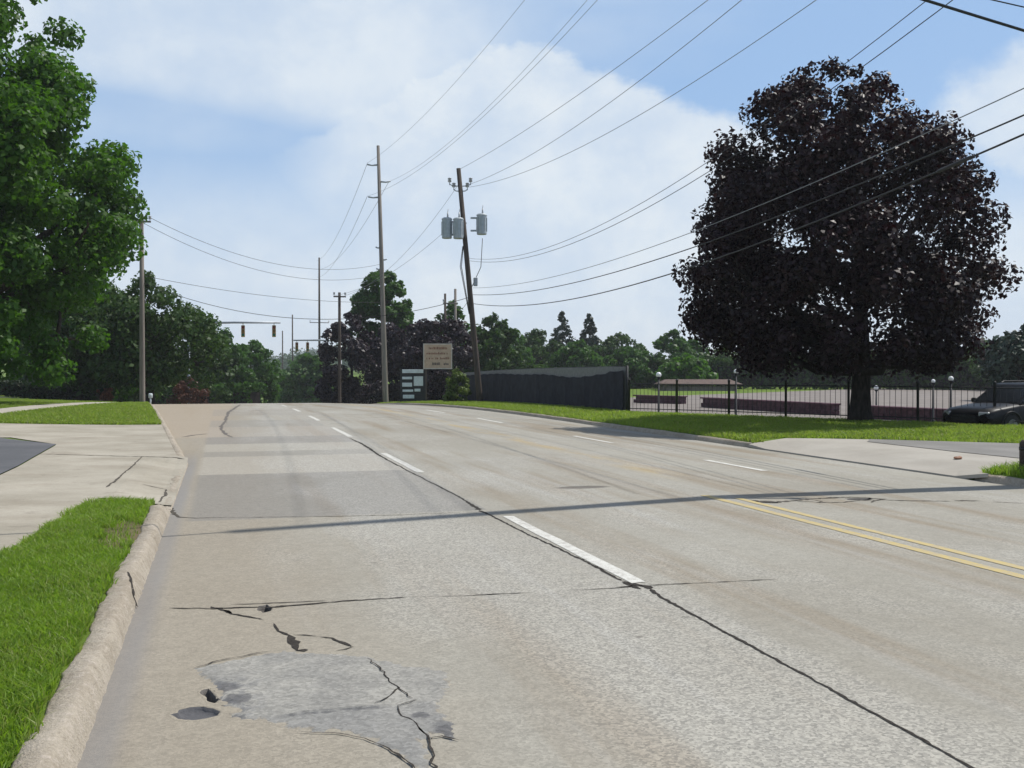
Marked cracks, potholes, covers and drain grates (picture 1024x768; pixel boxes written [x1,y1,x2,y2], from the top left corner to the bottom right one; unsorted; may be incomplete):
crack [186,592,529,667]
pothole [166,705,225,722]
pothole [197,687,222,705]
crack [479,510,975,768]
crack [127,572,138,607]
